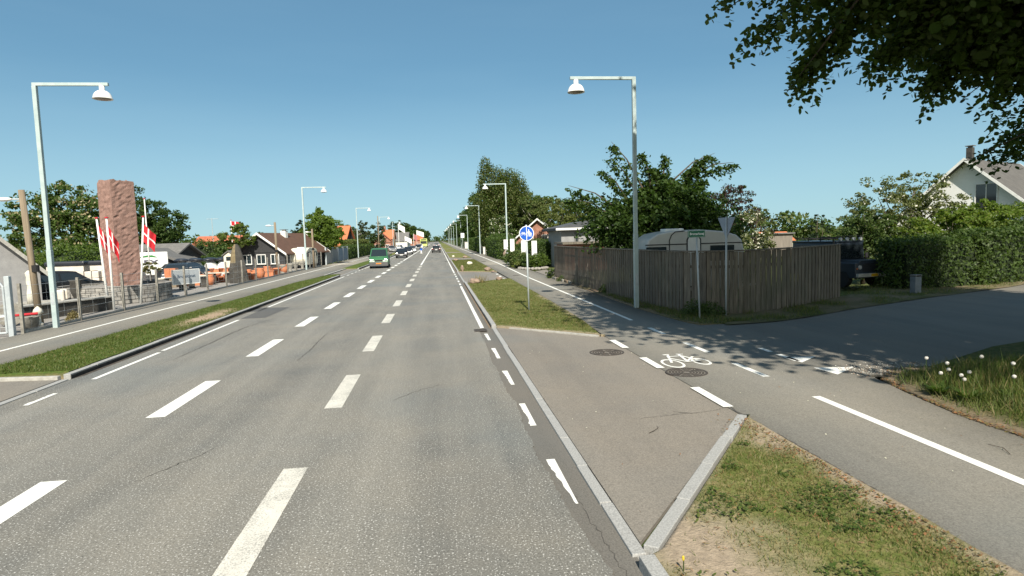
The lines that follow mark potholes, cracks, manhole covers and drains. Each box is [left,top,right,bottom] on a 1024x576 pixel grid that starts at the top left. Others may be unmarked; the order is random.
crack [578,501,627,576]
manhole cover [665,367,708,377]
